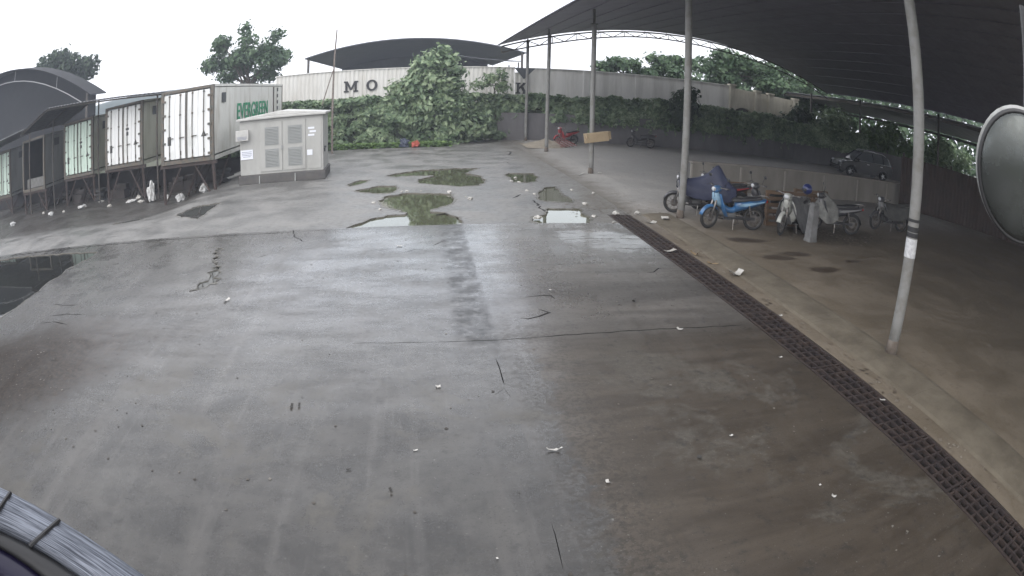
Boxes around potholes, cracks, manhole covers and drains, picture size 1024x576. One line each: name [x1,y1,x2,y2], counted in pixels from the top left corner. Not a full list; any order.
drain grate [634,233,674,245]
drain grate [899,435,973,493]
crack [40,304,82,324]
drain grate [741,311,805,340]
pothole [535,186,575,203]
drain grate [853,397,928,447]
drain grate [689,273,742,292]
drain grate [946,478,1015,543]
drain grate [609,215,643,224]
drain grate [713,291,771,314]
pothole [529,208,594,223]
crack [400,295,737,343]
